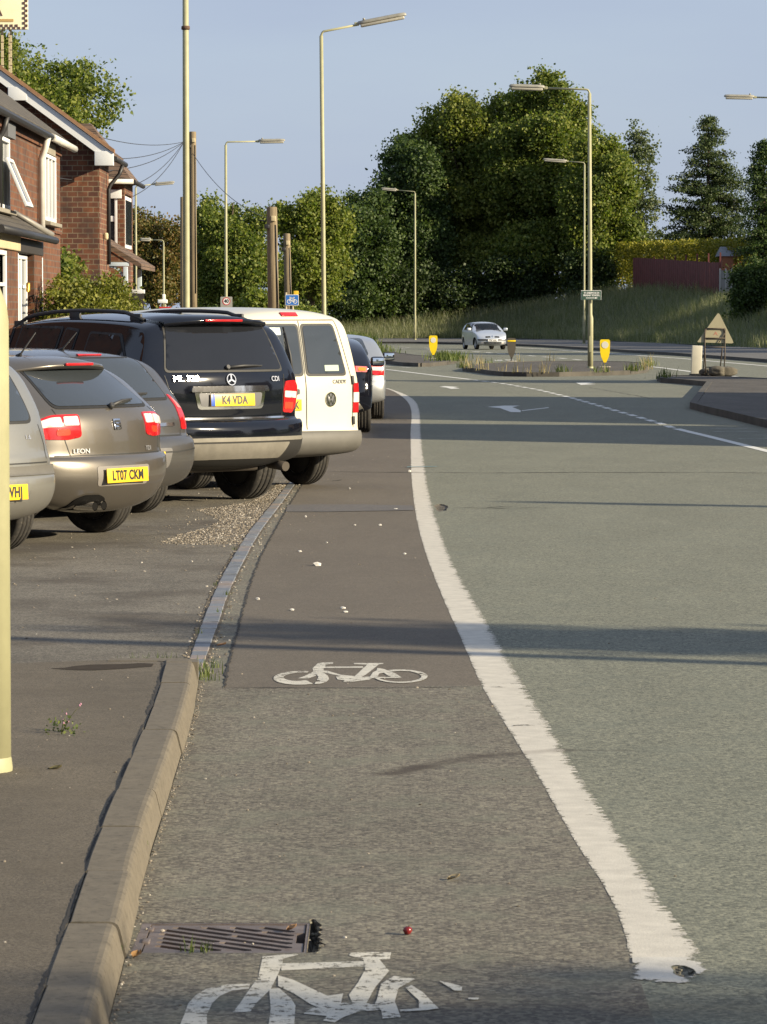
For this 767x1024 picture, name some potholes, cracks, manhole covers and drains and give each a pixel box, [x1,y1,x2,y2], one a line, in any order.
drain grate [131,923,310,953]
pothole [673,966,698,978]
